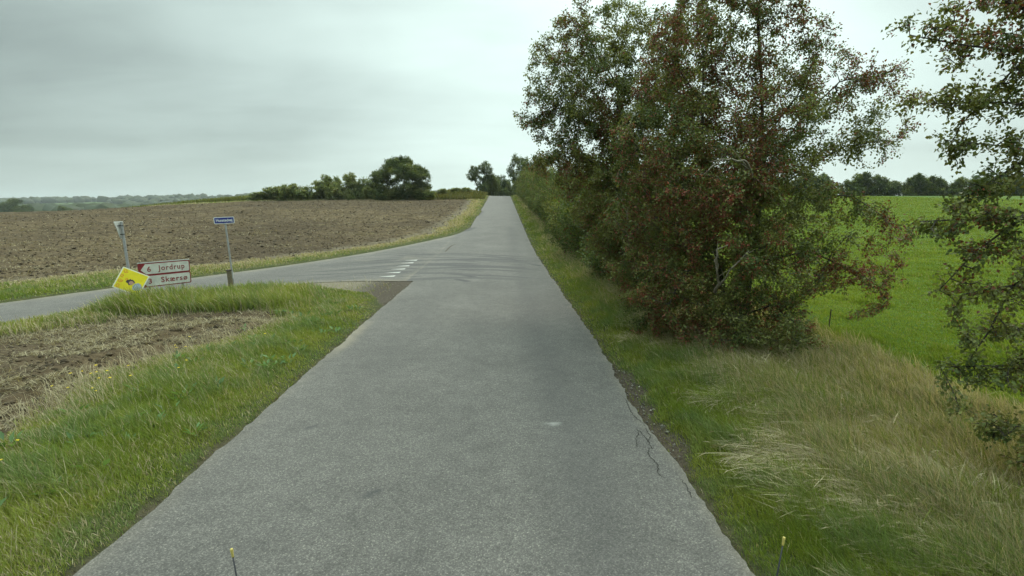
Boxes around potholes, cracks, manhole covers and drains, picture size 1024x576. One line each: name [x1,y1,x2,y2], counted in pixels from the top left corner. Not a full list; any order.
crack [625,399,661,476]
